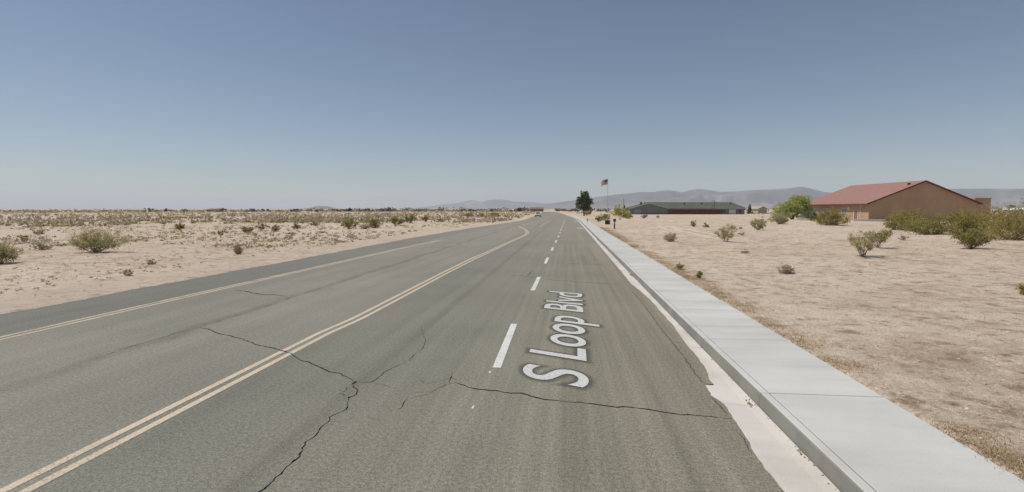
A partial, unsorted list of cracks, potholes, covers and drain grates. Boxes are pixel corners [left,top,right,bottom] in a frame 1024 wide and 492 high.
crack [387,291,752,454]
crack [199,327,426,492]
crack [101,253,431,357]
